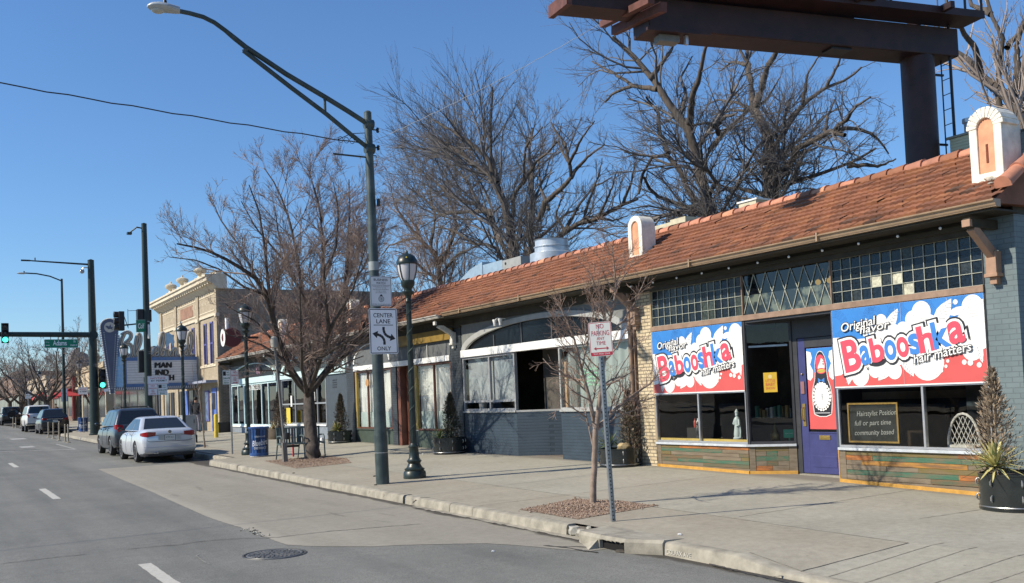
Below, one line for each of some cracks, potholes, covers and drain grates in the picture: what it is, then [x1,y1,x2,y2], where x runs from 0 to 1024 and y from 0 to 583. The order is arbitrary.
manhole cover [242,548,307,560]
drain grate [579,526,684,555]
